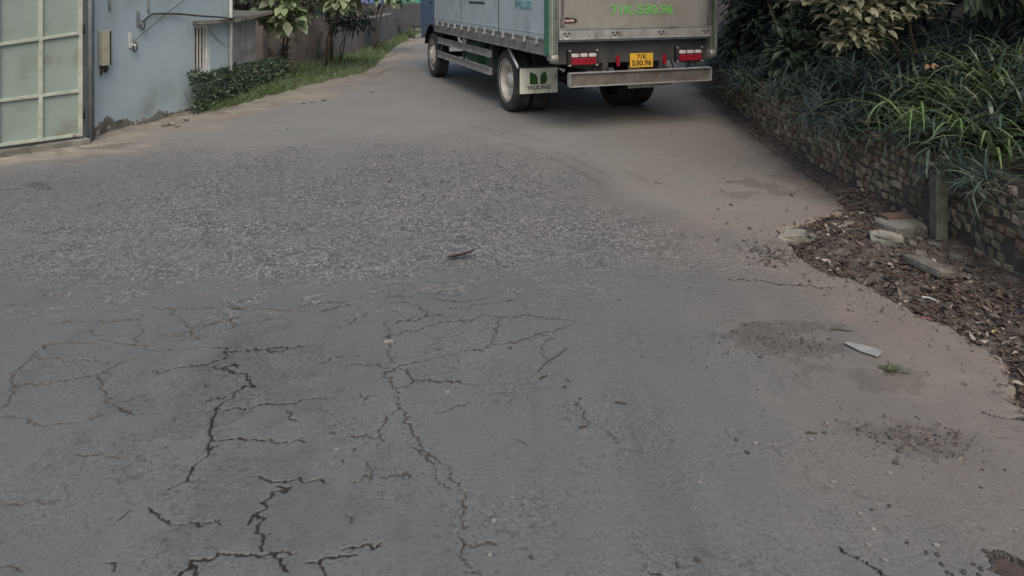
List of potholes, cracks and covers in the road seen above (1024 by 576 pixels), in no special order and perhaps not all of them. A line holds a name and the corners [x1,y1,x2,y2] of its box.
crack [728,279,831,289]
crack [317,295,576,576]
crack [5,497,62,506]
crack [118,507,222,527]
crack [176,475,382,576]
crack [6,561,27,572]
crack [0,304,327,459]
crack [153,345,325,490]
crack [838,546,886,576]
pothole [986,549,1024,576]
